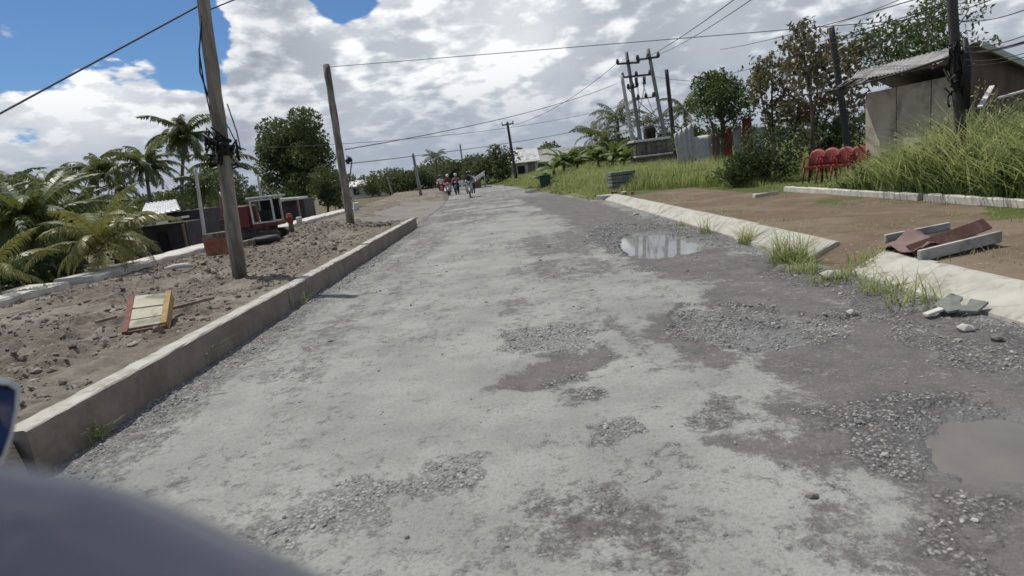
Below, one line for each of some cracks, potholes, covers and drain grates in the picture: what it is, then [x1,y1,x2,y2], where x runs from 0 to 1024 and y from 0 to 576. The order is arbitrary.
pothole [654,300,879,358]
pothole [494,344,632,400]
pothole [872,390,1024,499]
pothole [581,223,738,260]
